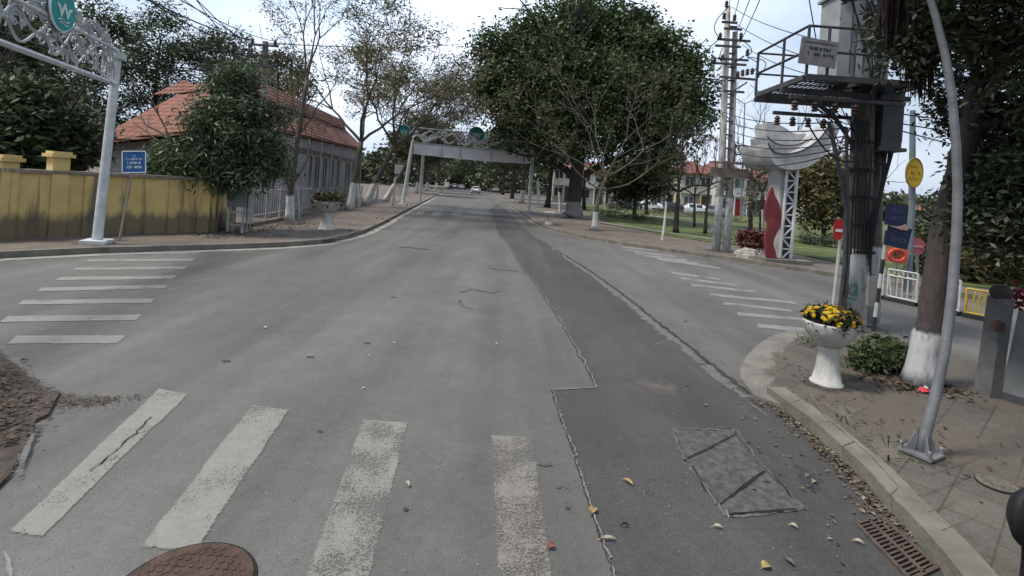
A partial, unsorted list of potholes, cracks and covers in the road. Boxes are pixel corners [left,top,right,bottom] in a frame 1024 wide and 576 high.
manhole cover [127,542,258,576]
manhole cover [974,474,1019,494]
drain grate [855,515,940,576]
crack [90,417,151,470]
